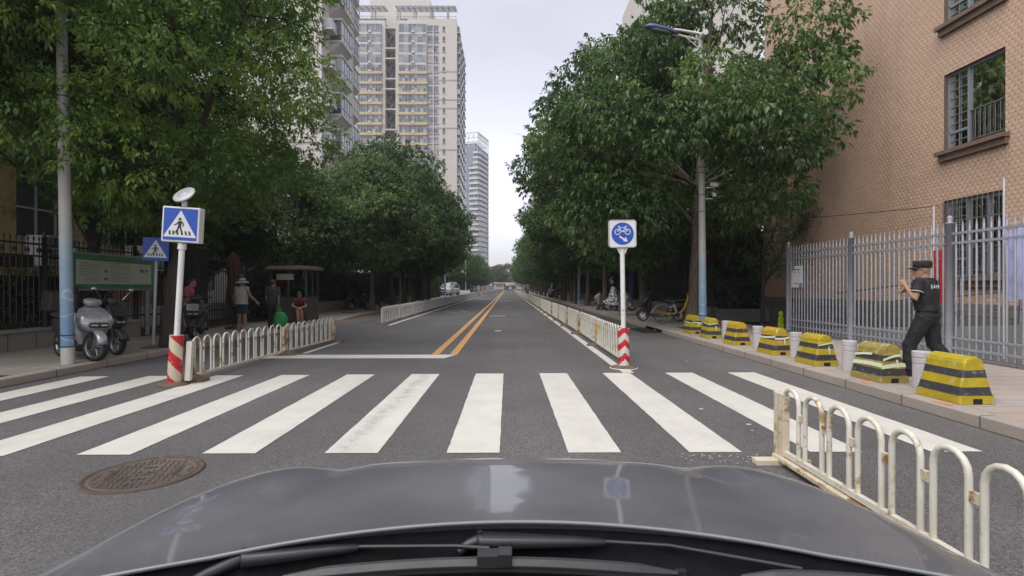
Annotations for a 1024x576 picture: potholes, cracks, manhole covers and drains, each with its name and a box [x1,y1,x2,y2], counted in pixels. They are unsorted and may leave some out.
drain grate [630,325,665,333]
manhole cover [76,456,205,495]
